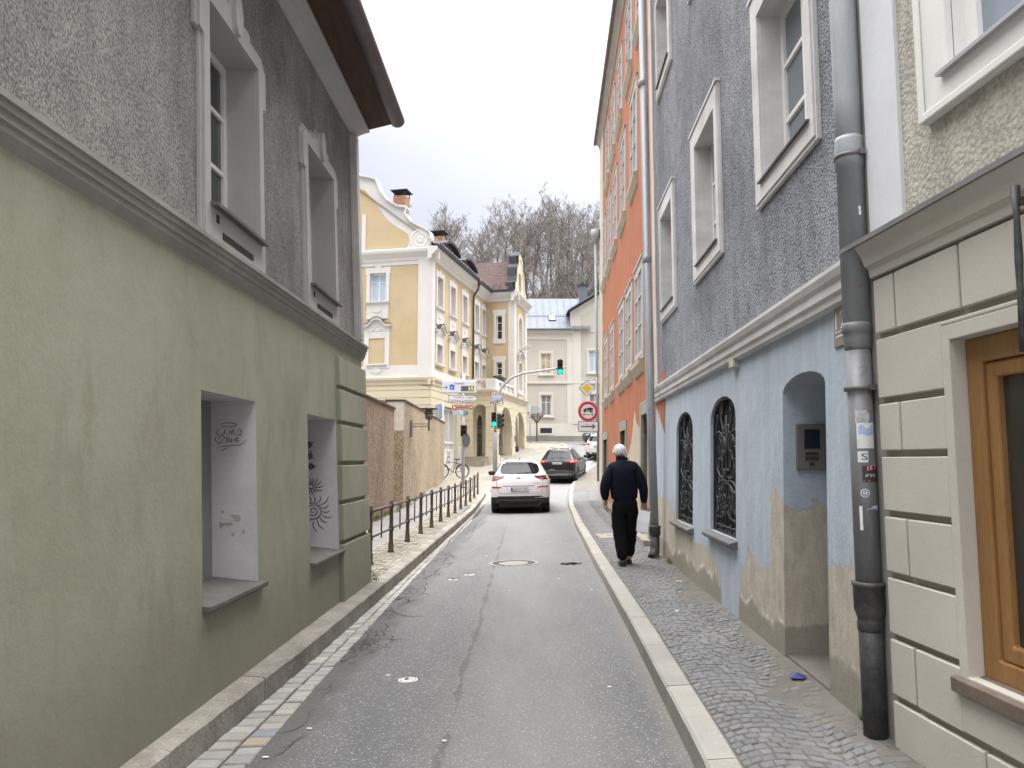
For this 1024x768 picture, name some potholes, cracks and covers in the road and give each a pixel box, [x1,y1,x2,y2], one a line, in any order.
crack [341,506,484,663]
crack [270,682,332,759]
